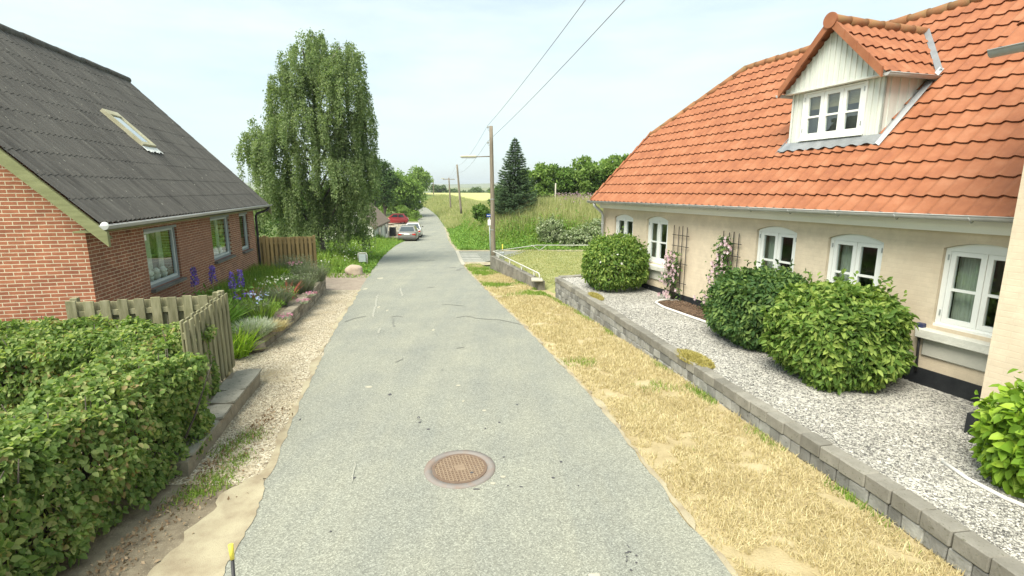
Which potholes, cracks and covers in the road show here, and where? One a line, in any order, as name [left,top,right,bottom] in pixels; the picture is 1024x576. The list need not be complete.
manhole cover [424,450,495,489]
